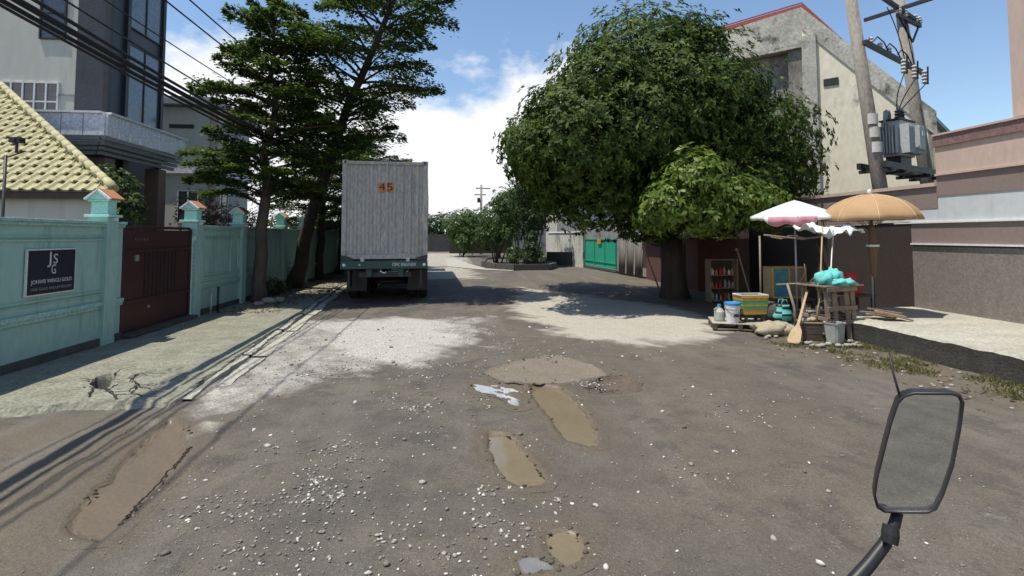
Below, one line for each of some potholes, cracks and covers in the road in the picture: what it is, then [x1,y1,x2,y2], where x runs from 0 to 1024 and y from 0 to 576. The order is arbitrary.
pothole [460,380,534,412]
pothole [530,521,603,576]
pothole [576,372,652,397]
pothole [44,415,200,551]
crack [80,366,165,398]
pothole [527,382,610,452]
pothole [474,428,560,494]
